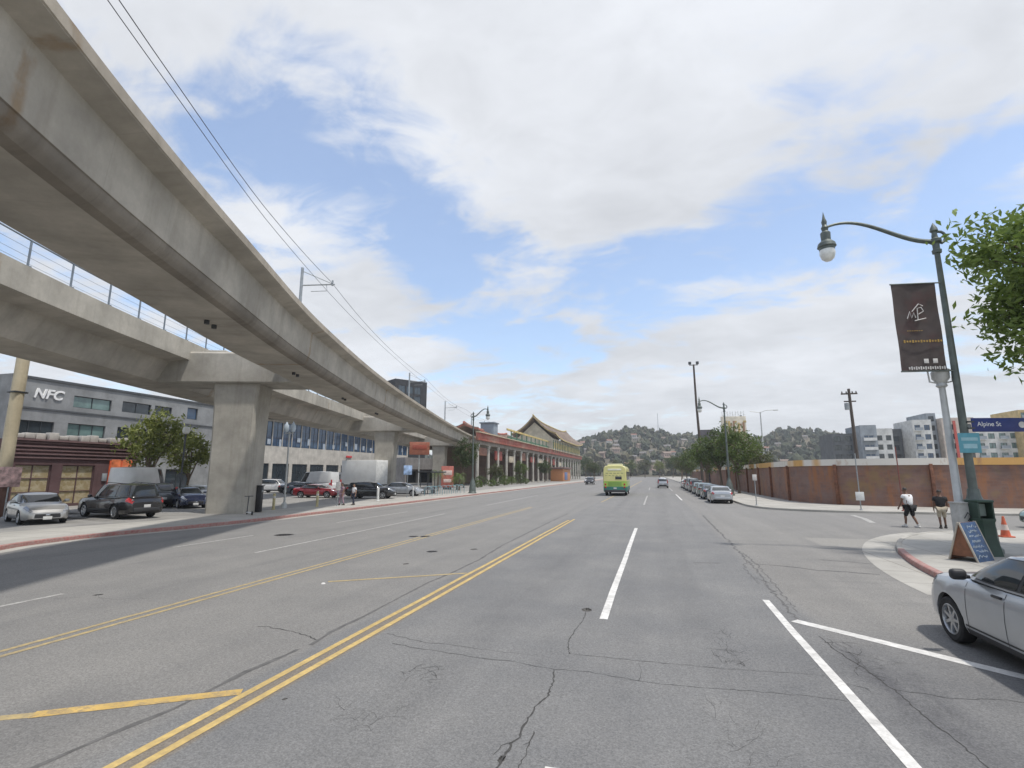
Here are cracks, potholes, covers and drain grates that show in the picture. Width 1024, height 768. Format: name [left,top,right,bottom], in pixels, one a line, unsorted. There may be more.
crack [819,636,1023,768]
crack [387,612,845,768]
